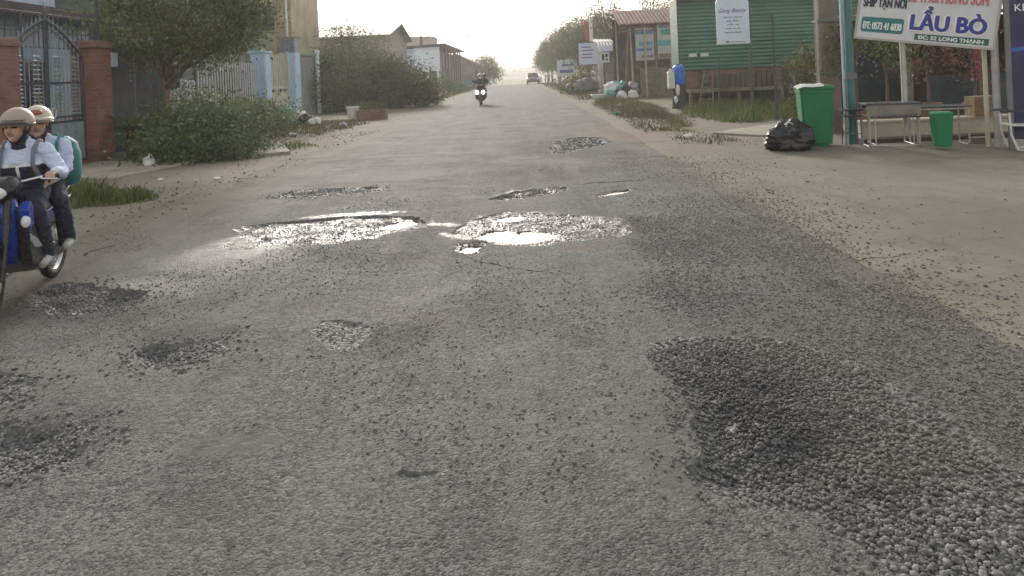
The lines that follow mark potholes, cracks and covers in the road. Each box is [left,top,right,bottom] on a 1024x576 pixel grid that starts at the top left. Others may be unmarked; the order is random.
pothole [396,468,450,478]
pothole [232,215,426,246]
pothole [646,334,1024,576]
pothole [548,137,612,153]
pothole [489,186,568,200]
pothole [450,212,631,246]
pothole [276,186,384,198]
pothole [134,338,232,369]
pothole [596,189,631,197]
pothole [0,419,91,482]
pothole [23,281,150,315]
pothole [451,241,488,256]
